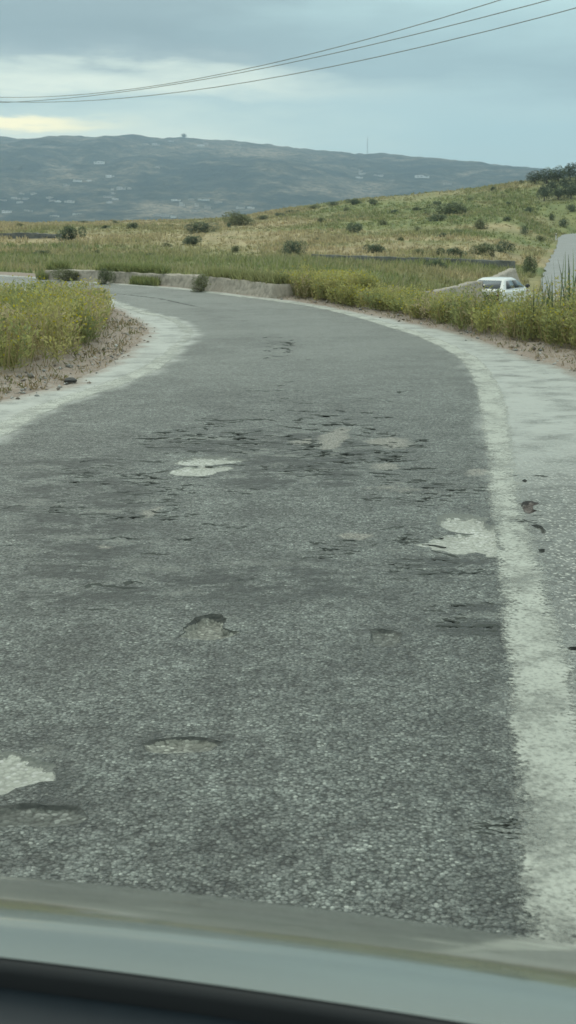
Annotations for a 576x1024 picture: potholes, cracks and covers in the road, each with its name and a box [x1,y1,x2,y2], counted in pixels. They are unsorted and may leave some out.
crack [450,816,526,849]
pothole [0,751,56,795]
crack [421,602,506,636]
crack [49,385,492,589]
pothole [519,501,539,514]
pothole [178,613,239,640]
pothole [0,803,89,828]
pothole [412,513,499,558]
pothole [168,456,247,477]
pothole [141,736,223,754]
